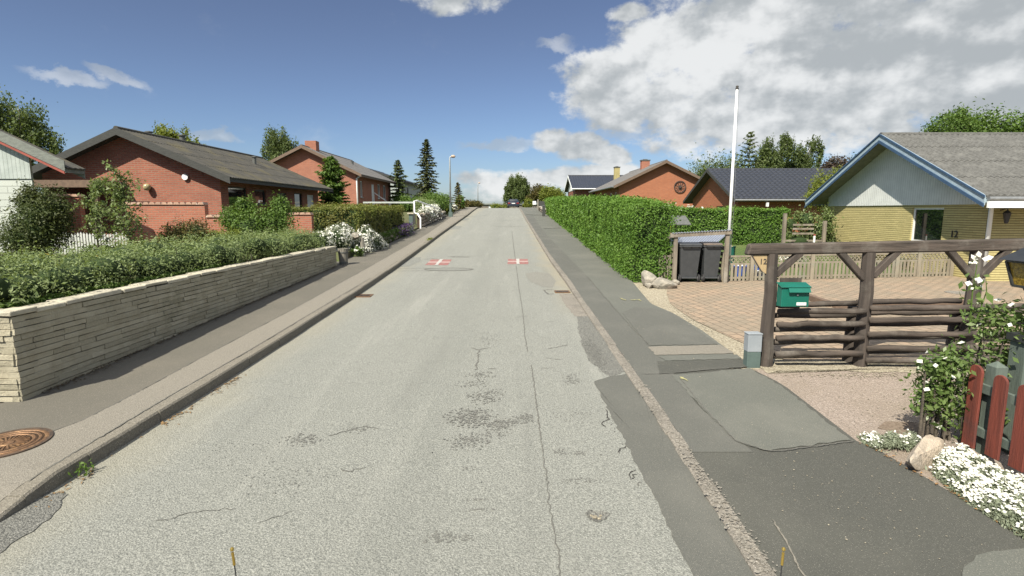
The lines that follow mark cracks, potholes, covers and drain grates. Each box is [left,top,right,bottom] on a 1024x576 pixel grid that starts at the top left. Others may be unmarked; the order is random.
manhole cover [0,427,54,458]
pothole [585,510,610,522]
crack [508,220,565,576]
